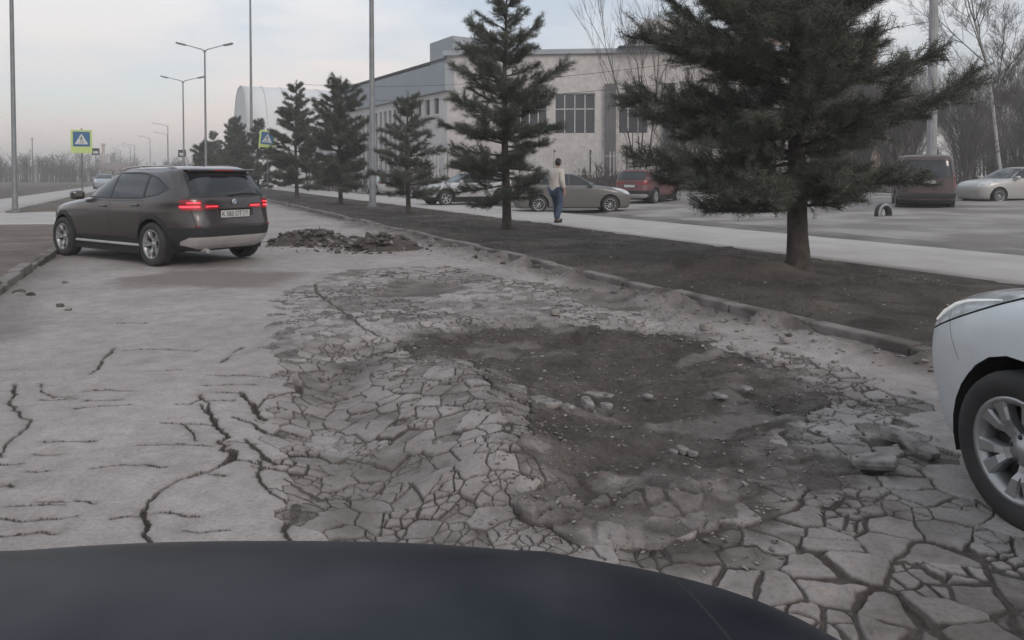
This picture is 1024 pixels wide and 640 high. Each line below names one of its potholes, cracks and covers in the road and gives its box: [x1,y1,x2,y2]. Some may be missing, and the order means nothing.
pothole [394,323,830,552]
crack [0,265,1024,640]
